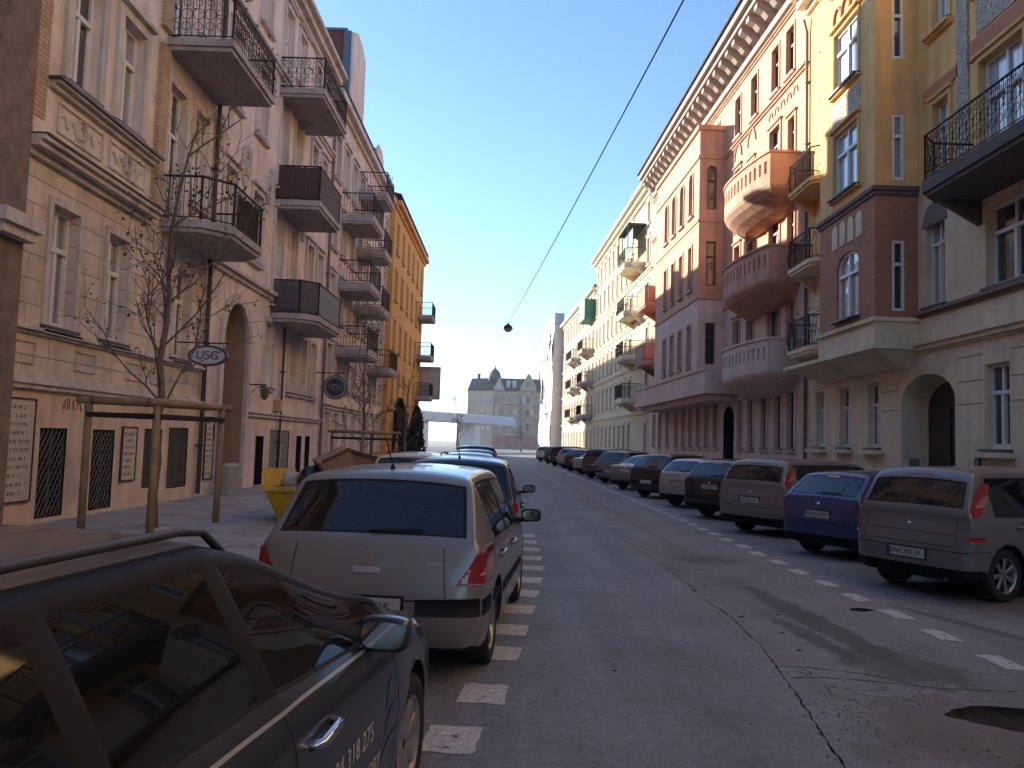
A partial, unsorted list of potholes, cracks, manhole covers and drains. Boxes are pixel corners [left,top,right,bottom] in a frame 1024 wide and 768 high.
pothole [944,706,1024,733]
crack [783,666,1017,711]
